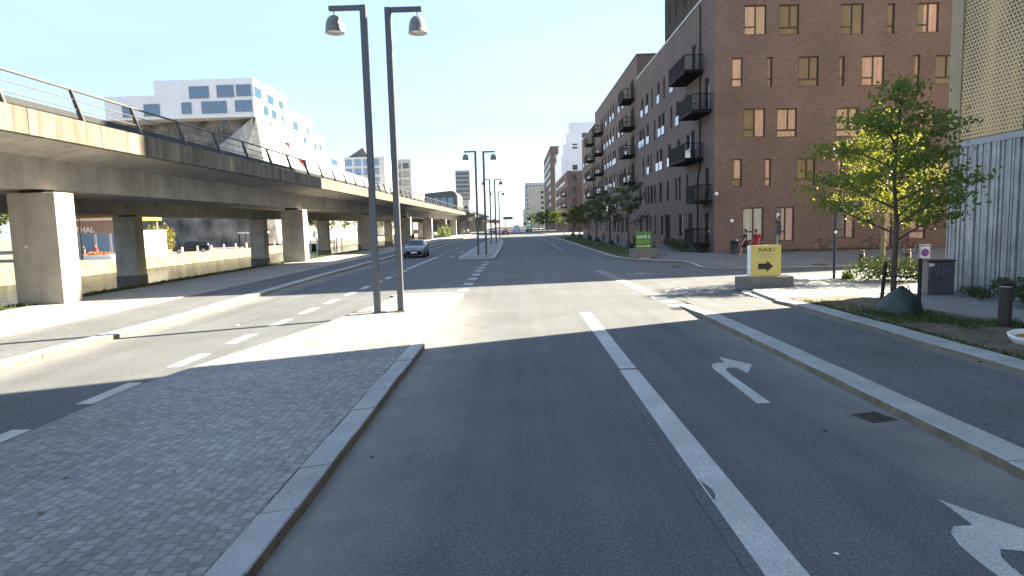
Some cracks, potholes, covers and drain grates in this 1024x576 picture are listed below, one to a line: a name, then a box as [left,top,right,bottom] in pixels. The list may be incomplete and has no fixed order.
drain grate [851,411,898,423]
